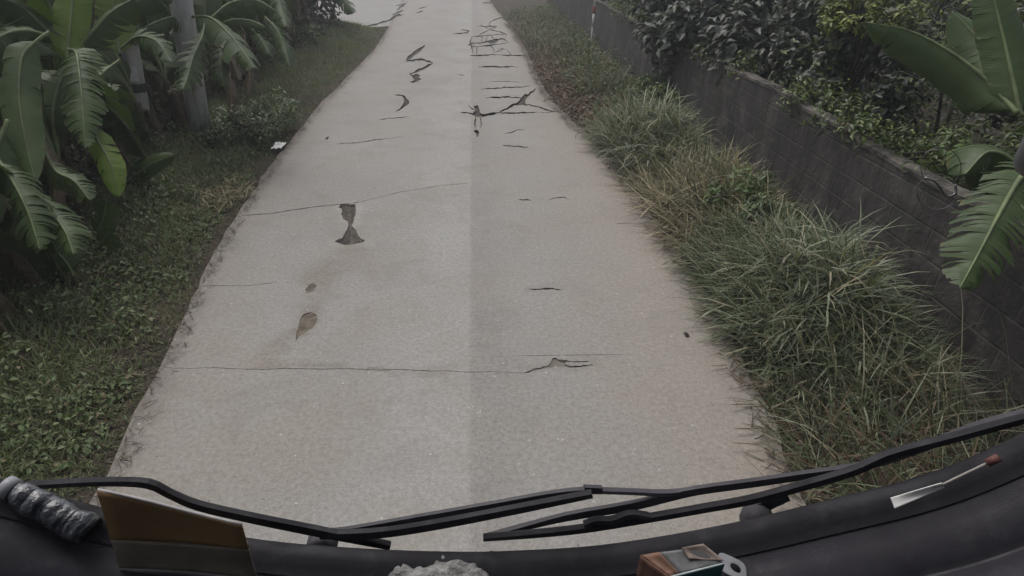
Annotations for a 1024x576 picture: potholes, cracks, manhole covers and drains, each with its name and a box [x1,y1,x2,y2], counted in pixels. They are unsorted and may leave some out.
crack [525,354,632,373]
crack [252,183,466,215]
crack [455,2,561,148]
pothole [295,312,317,341]
crack [369,2,424,26]
crack [380,45,433,120]
pothole [335,204,365,245]
